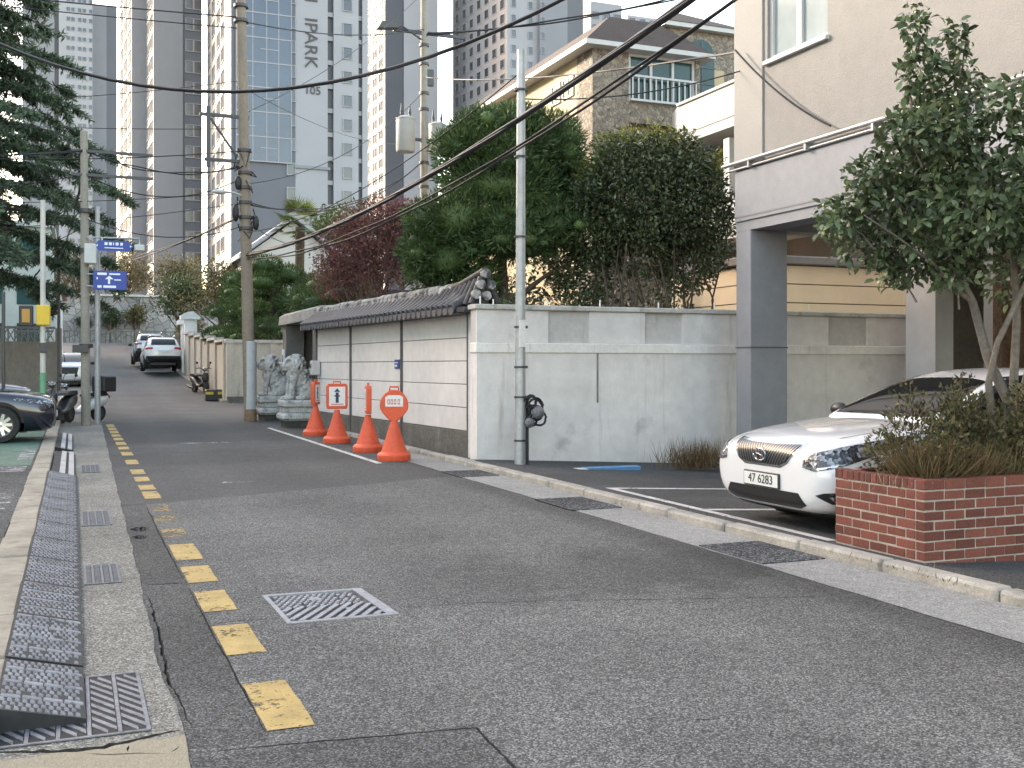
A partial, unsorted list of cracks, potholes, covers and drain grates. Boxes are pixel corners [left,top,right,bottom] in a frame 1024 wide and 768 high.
drain grate [441,470,499,478]
manhole cover [262,588,399,624]
drain grate [699,541,825,564]
drain grate [81,510,112,527]
crack [0,583,193,755]
drain grate [83,563,122,585]
drain grate [80,465,101,473]
drain grate [535,497,622,511]
